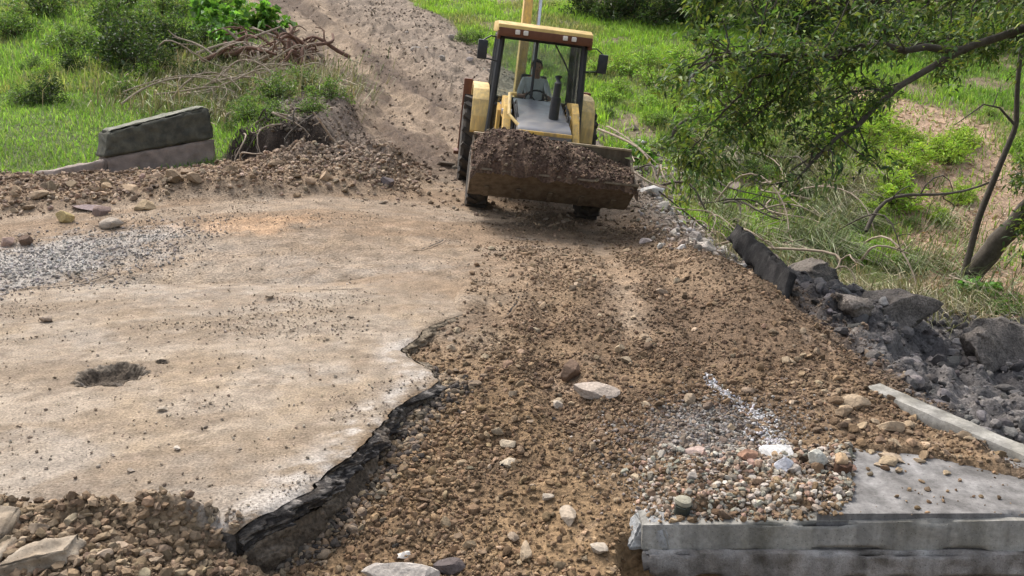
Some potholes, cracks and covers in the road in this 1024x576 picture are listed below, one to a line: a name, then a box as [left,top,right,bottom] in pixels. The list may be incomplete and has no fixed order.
pothole [70,361,151,388]
